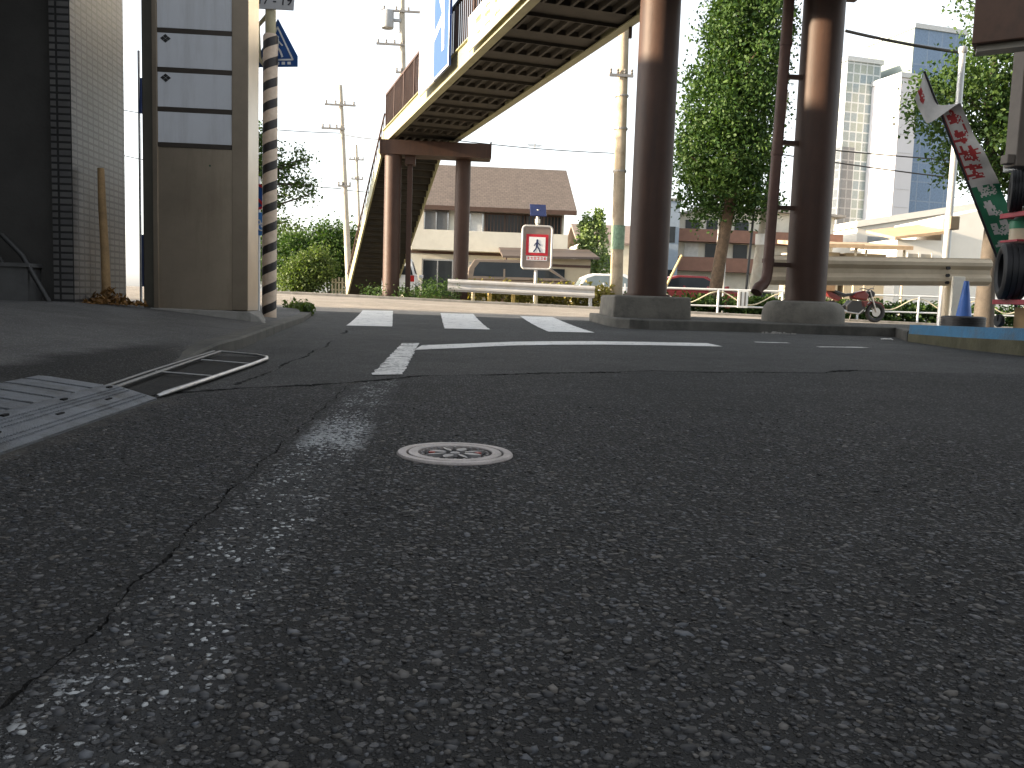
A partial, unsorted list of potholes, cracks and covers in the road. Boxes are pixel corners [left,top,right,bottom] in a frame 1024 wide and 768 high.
manhole cover [397,442,513,466]
crack [0,328,925,710]
